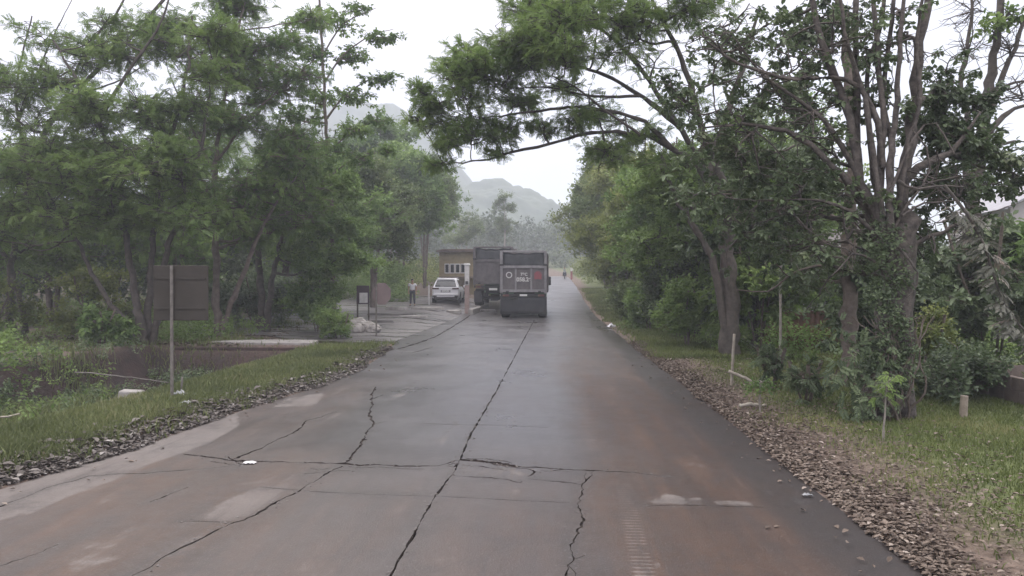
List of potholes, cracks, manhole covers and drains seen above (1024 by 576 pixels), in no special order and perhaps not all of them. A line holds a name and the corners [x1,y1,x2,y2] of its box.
crack [0,320,657,576]
